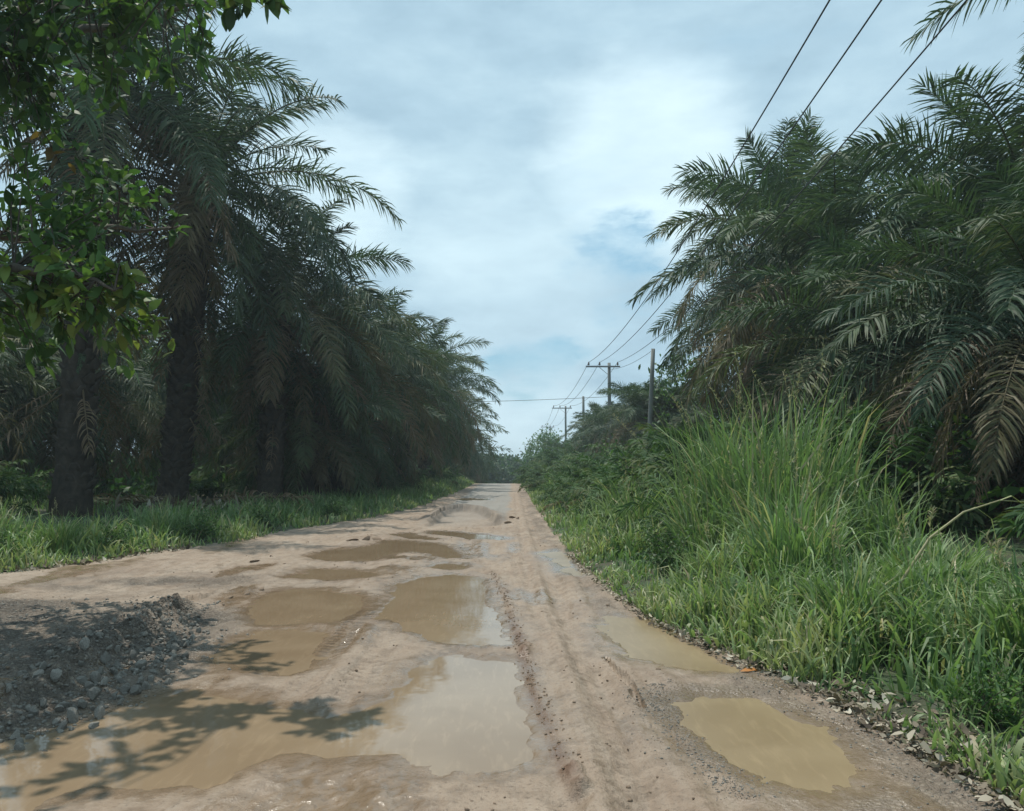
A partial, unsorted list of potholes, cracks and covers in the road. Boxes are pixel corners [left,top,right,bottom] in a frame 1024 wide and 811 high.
pothole [298,539,483,562]
pothole [180,625,347,679]
pothole [416,503,510,528]
pothole [368,571,533,652]
pothole [639,683,903,811]
pothole [582,610,760,677]
pothole [0,647,584,811]
